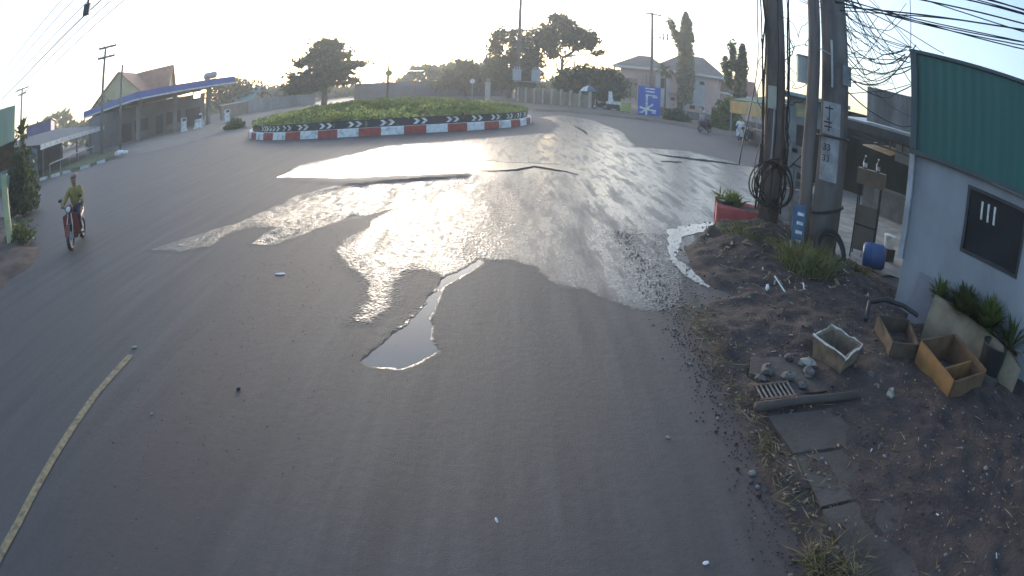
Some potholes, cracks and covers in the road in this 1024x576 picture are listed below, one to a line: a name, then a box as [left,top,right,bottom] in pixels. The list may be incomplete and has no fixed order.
pothole [359,258,485,371]
drain grate [752,380,798,401]
